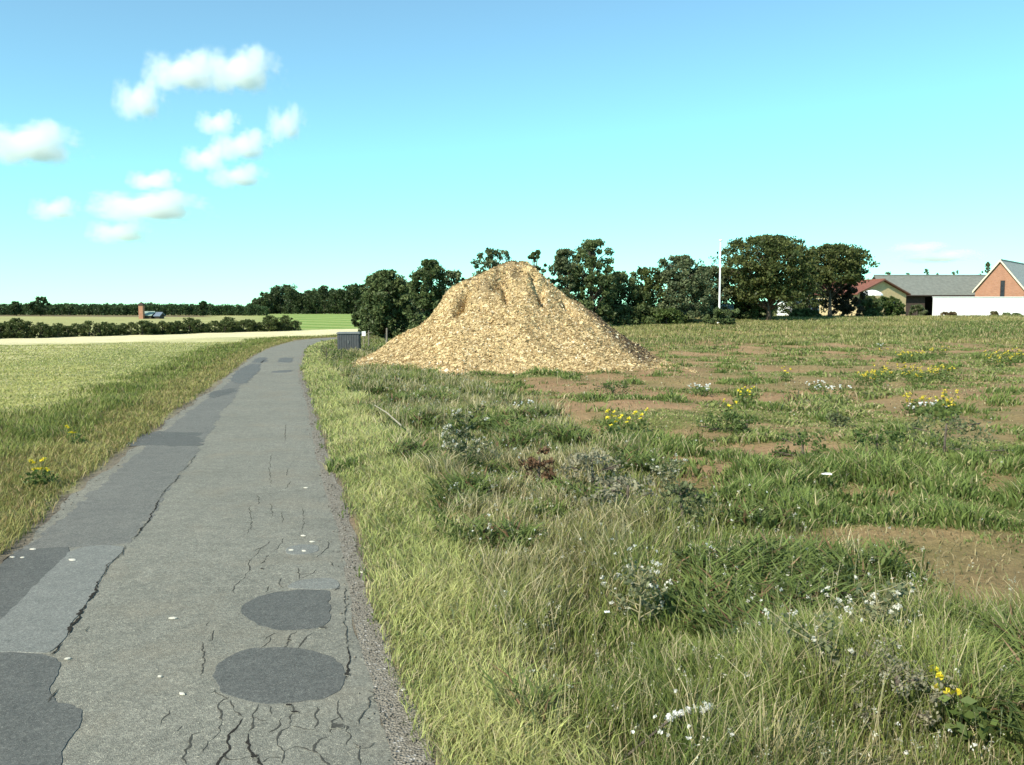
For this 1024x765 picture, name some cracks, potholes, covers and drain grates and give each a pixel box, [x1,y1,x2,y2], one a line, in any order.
crack [232,425,333,591]
crack [161,622,386,765]
crack [335,588,351,679]
crack [50,546,126,655]
